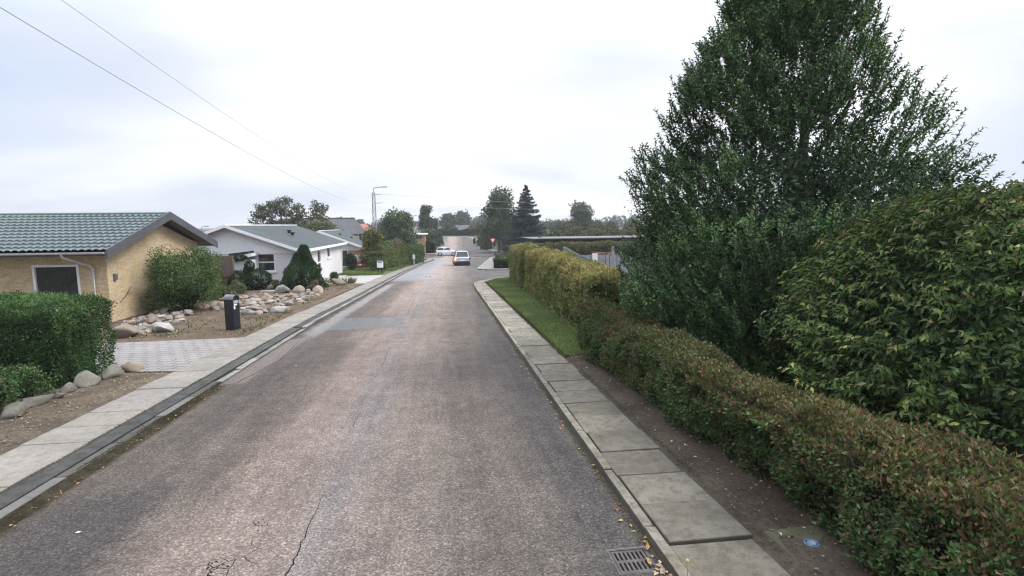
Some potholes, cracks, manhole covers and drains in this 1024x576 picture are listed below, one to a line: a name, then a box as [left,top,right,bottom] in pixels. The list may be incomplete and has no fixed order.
crack [285,497,322,576]
drain grate [607,547,659,575]
crack [189,519,268,576]
